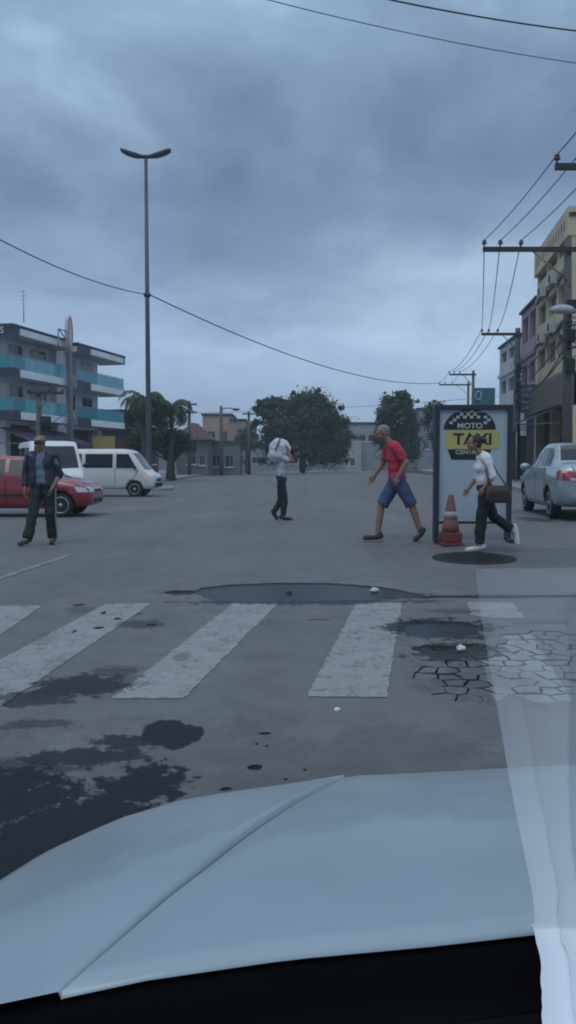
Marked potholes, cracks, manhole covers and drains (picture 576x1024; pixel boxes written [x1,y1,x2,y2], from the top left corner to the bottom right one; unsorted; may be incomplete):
manhole cover [432,552,517,565]
pothole [402,620,478,638]
pothole [411,643,495,654]
crack [412,630,576,703]
pothole [195,583,415,602]
